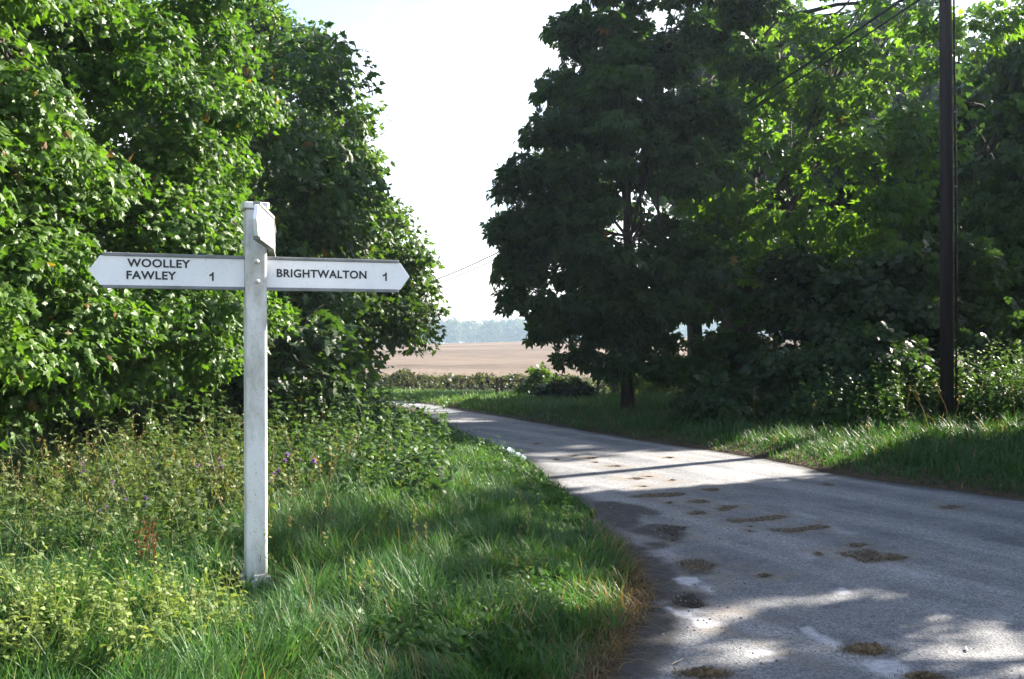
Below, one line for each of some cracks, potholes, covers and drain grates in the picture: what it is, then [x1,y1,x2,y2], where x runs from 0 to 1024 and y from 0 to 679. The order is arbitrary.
pothole [676,559,715,571]
pothole [653,525,688,542]
pothole [838,549,908,563]
pothole [671,592,706,609]
pothole [726,515,787,523]
pothole [771,524,830,533]
